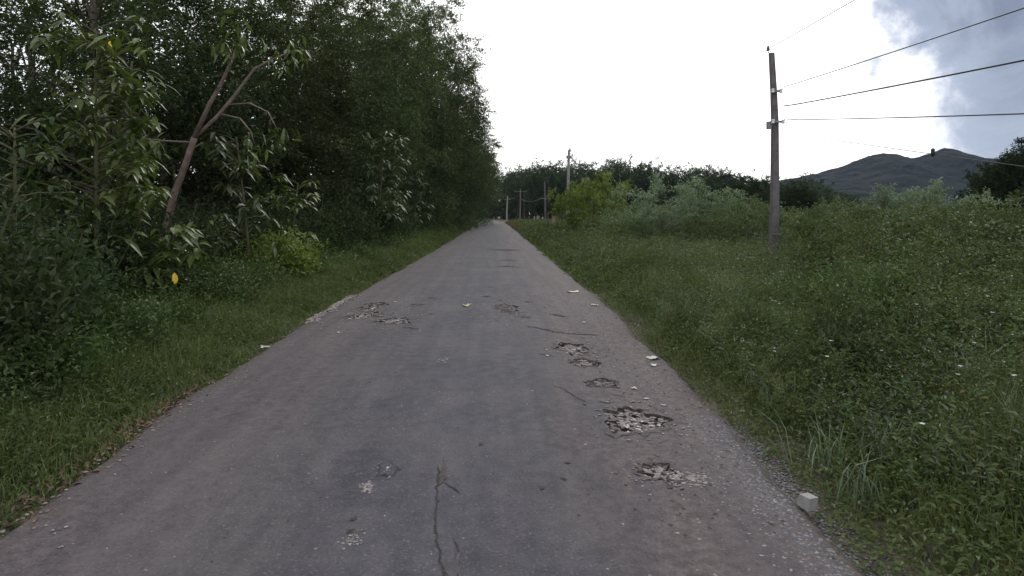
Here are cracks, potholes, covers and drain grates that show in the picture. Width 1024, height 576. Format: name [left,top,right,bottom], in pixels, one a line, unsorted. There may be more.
pothole [375,459,401,477]
pothole [575,377,621,388]
pothole [354,300,400,315]
pothole [368,315,417,326]
pothole [615,454,693,492]
pothole [325,310,395,320]
pothole [544,339,597,361]
pothole [583,399,693,442]
crack [434,466,461,576]
crack [487,287,594,335]
pothole [566,355,606,369]
pothole [491,303,522,314]
